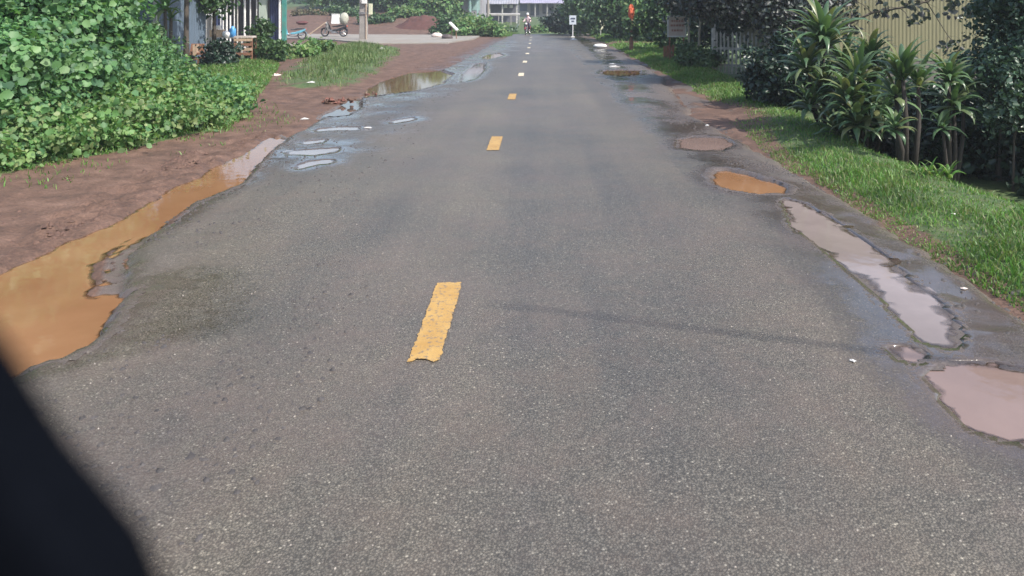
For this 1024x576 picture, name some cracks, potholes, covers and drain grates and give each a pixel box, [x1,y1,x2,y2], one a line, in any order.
pothole [0,131,291,373]
pothole [905,355,1024,453]
pothole [700,166,799,195]
pothole [775,198,973,356]
pothole [460,62,487,82]
pothole [671,136,741,151]
pothole [873,337,947,370]
pothole [294,160,338,169]
pothole [359,70,455,99]
pothole [283,147,340,155]
